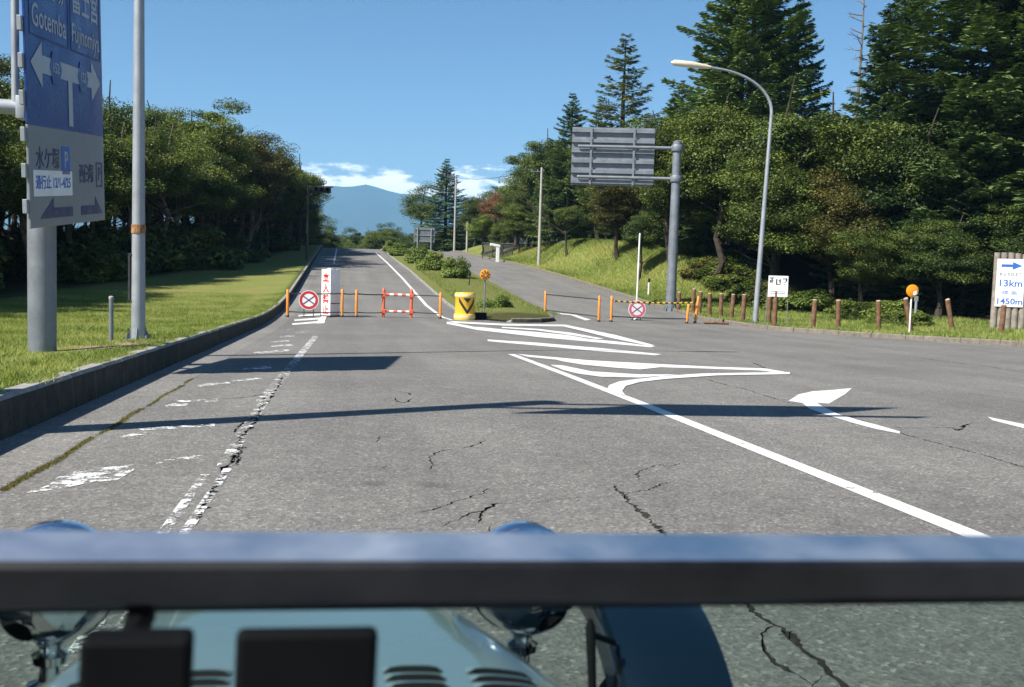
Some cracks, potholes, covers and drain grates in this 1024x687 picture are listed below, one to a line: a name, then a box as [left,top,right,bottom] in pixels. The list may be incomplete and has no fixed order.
crack [613,463,849,687]
crack [195,377,283,519]
crack [418,488,577,532]
